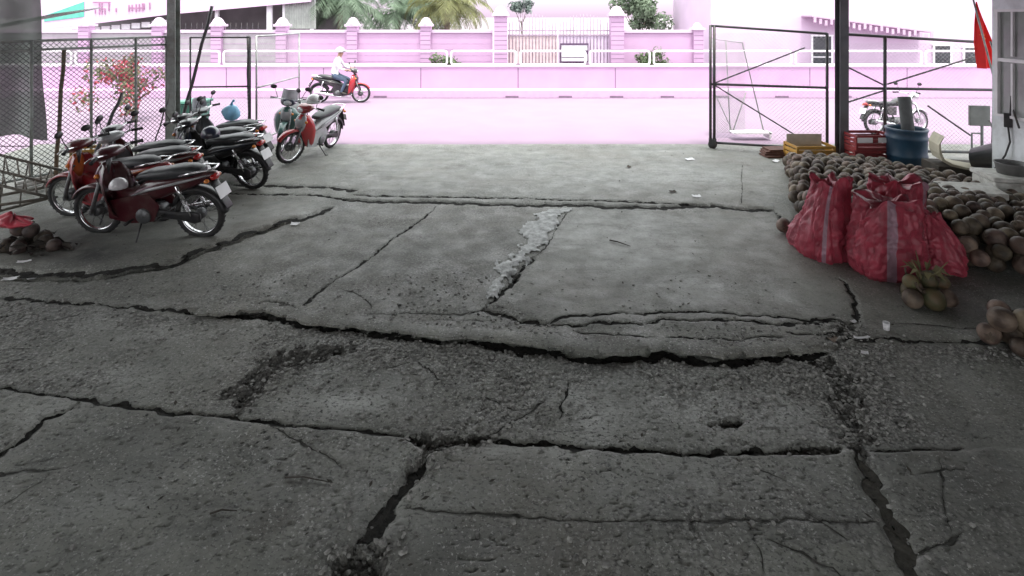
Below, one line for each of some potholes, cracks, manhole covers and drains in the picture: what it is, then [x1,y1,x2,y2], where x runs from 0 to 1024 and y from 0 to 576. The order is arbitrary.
crack [0,387,413,506]
crack [0,184,1007,481]
crack [870,448,965,556]
pothole [718,420,743,429]
pothole [219,341,357,415]
